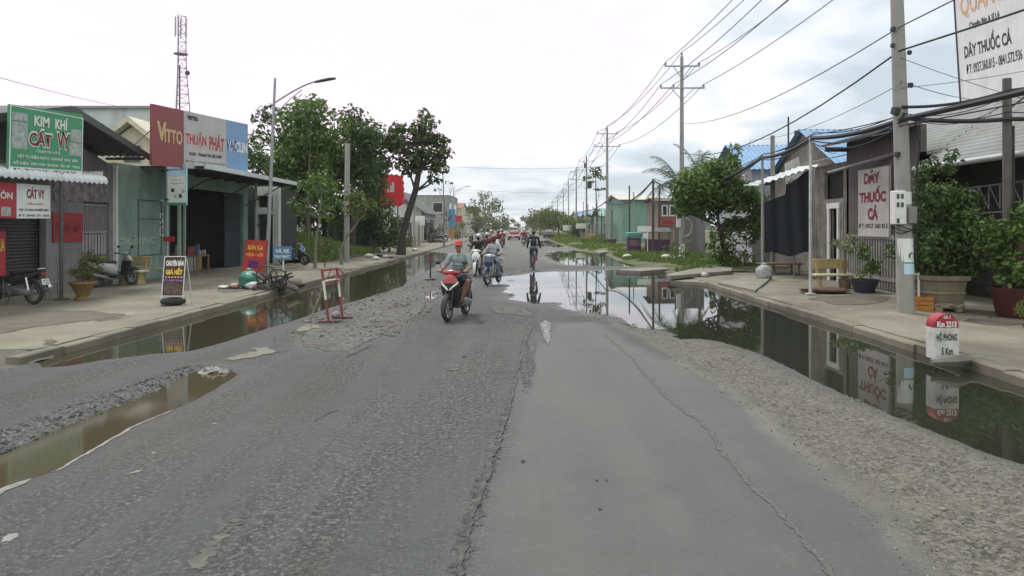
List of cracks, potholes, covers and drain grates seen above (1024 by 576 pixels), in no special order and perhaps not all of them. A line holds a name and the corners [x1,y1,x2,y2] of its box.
crack [604,313,834,576]
crack [437,324,535,576]
